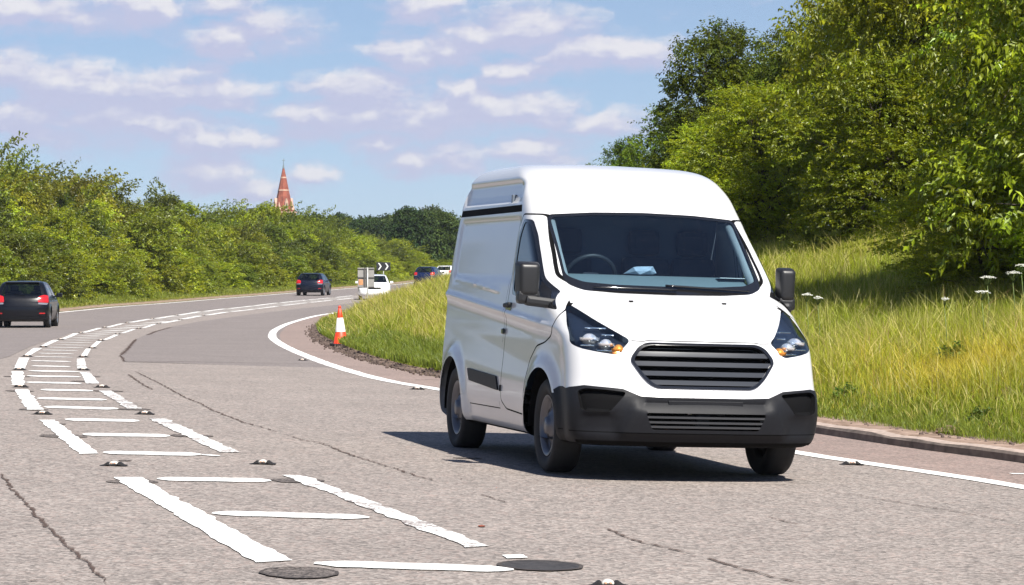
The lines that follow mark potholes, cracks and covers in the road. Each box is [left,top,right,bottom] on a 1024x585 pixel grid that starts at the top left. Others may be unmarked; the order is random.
crack [1,474,107,583]
manhole cover [497,560,584,571]
crack [119,327,278,432]
crack [288,435,432,480]
manhole cover [259,567,339,578]
crack [605,527,686,552]
